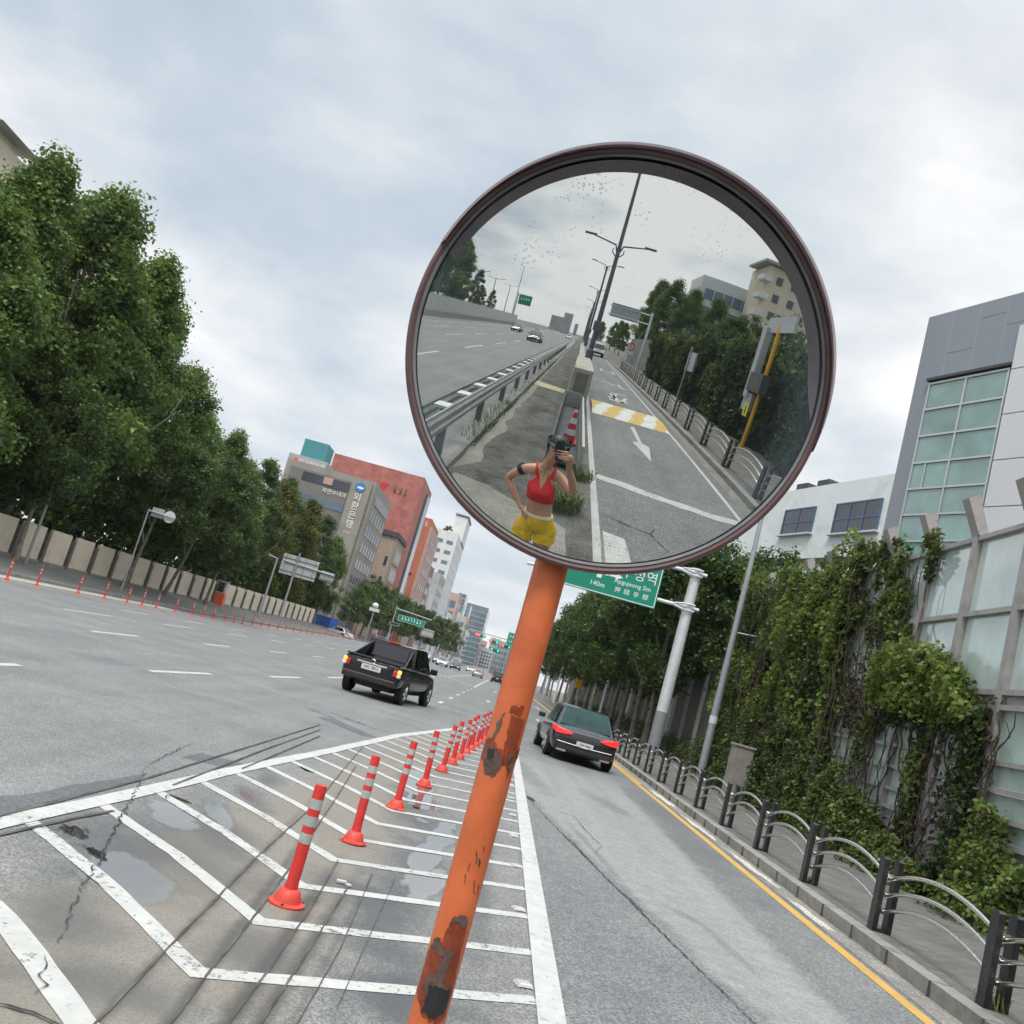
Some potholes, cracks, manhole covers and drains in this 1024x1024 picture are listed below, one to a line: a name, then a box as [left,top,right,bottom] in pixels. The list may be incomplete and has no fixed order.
crack [0,743,191,1024]
